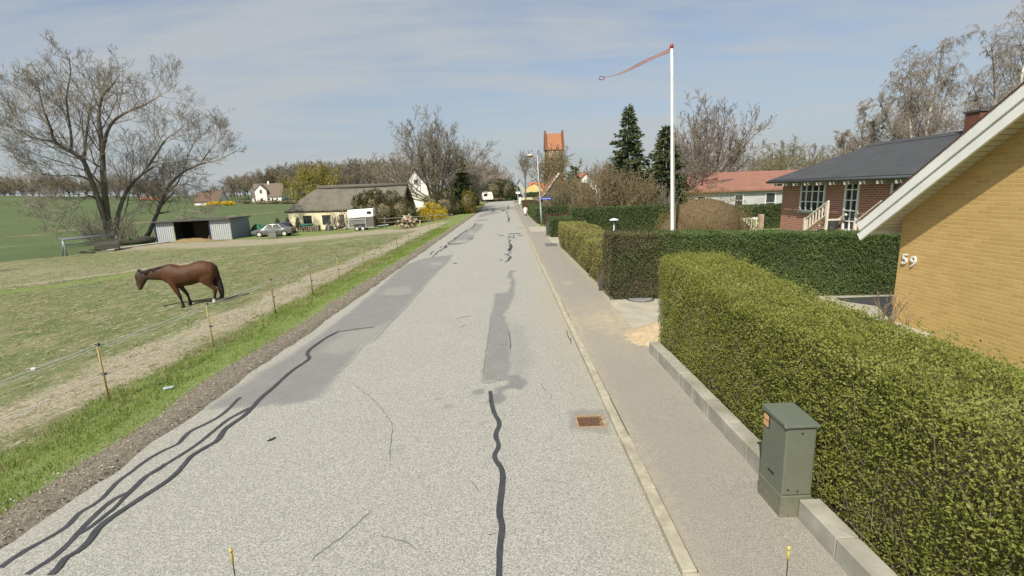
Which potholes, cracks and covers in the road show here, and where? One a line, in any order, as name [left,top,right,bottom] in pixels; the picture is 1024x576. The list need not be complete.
crack [312,512,416,561]
drain grate [574,412,608,428]
crack [357,387,393,459]
